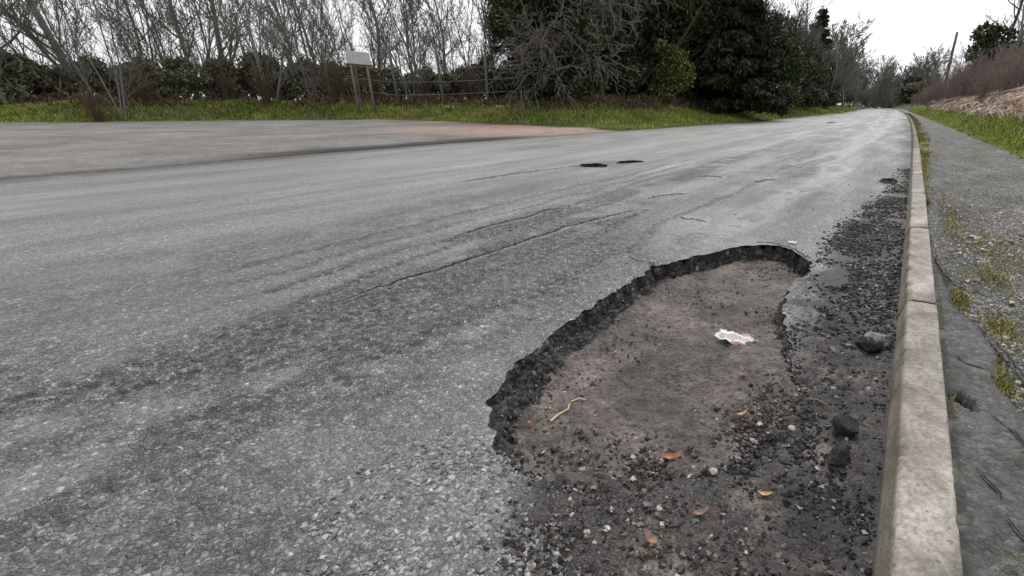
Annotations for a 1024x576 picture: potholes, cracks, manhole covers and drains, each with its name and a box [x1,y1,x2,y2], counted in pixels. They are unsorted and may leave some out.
crack [331,175,722,304]
crack [991,415,1024,446]
pothole [486,245,812,487]
crack [973,466,1024,540]
